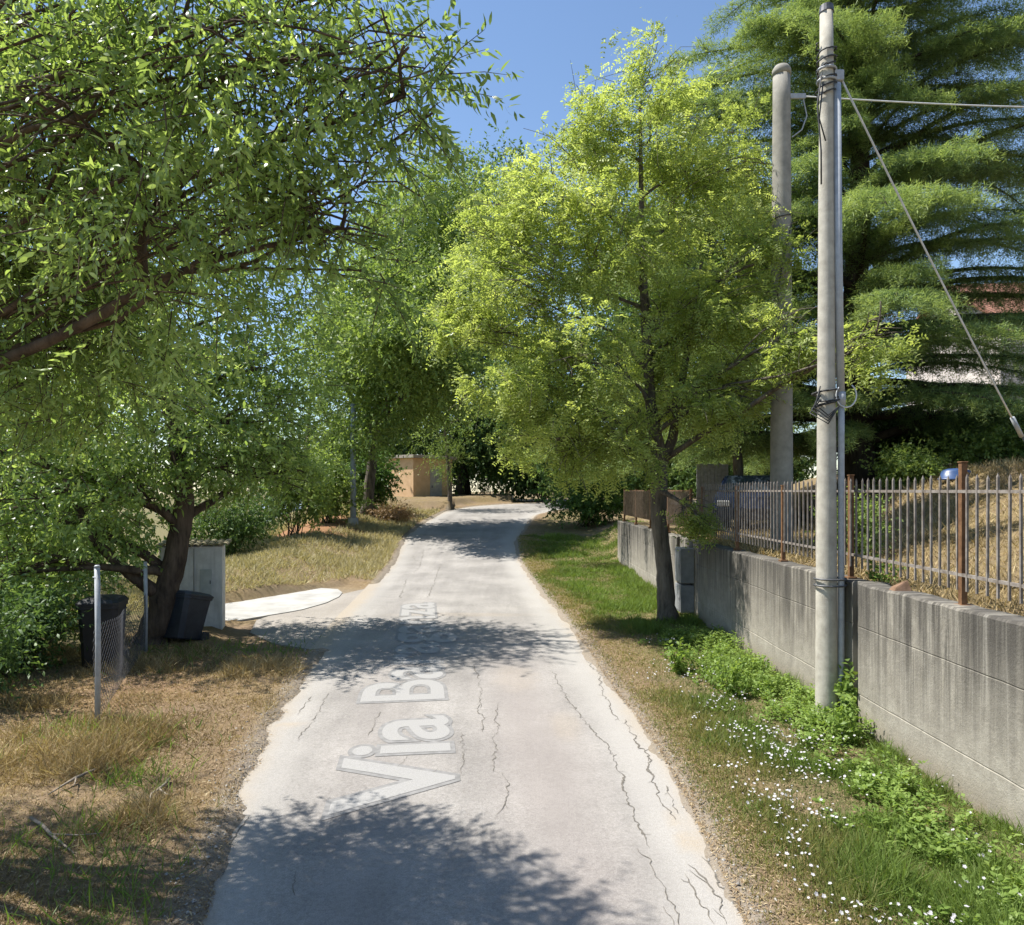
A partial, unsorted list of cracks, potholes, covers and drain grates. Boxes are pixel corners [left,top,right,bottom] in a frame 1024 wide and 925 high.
crack [460,668,510,815]
crack [552,662,735,925]
